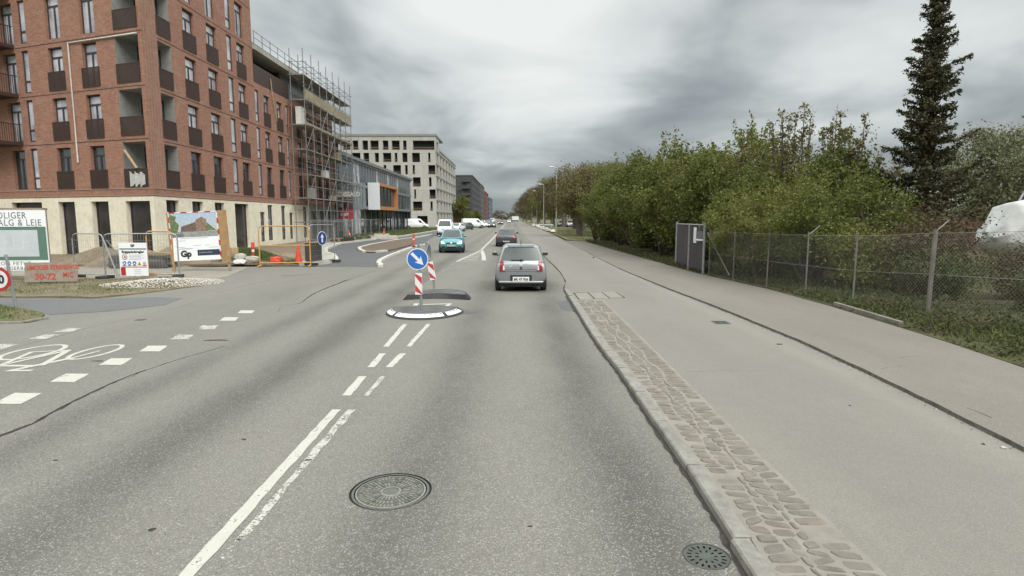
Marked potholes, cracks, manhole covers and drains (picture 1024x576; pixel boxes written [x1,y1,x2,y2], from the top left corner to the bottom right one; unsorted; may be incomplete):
manhole cover [349,473,432,511]
